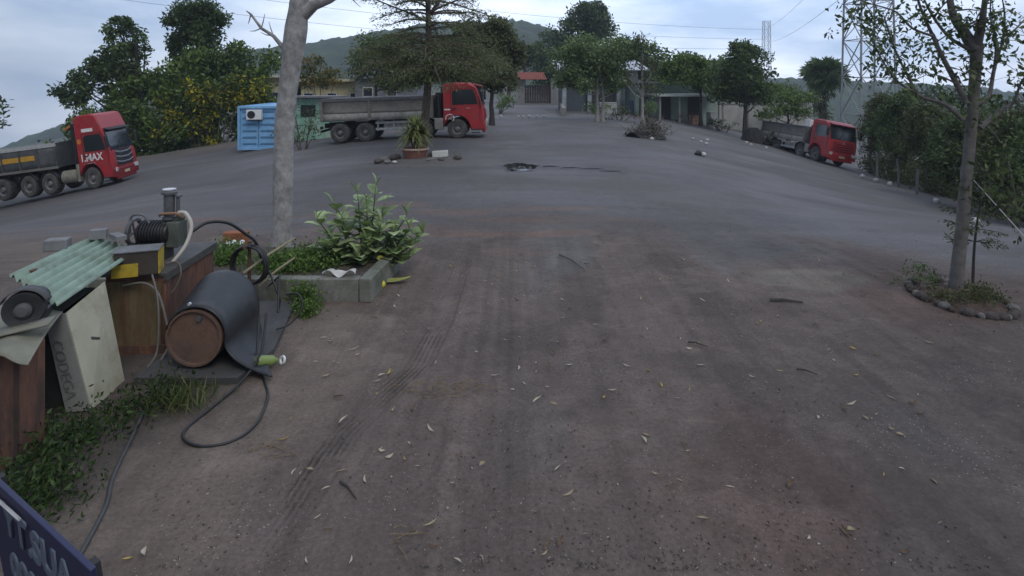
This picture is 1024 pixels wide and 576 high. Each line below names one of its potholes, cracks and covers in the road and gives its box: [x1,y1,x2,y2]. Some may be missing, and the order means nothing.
pothole [499,162,541,173]
